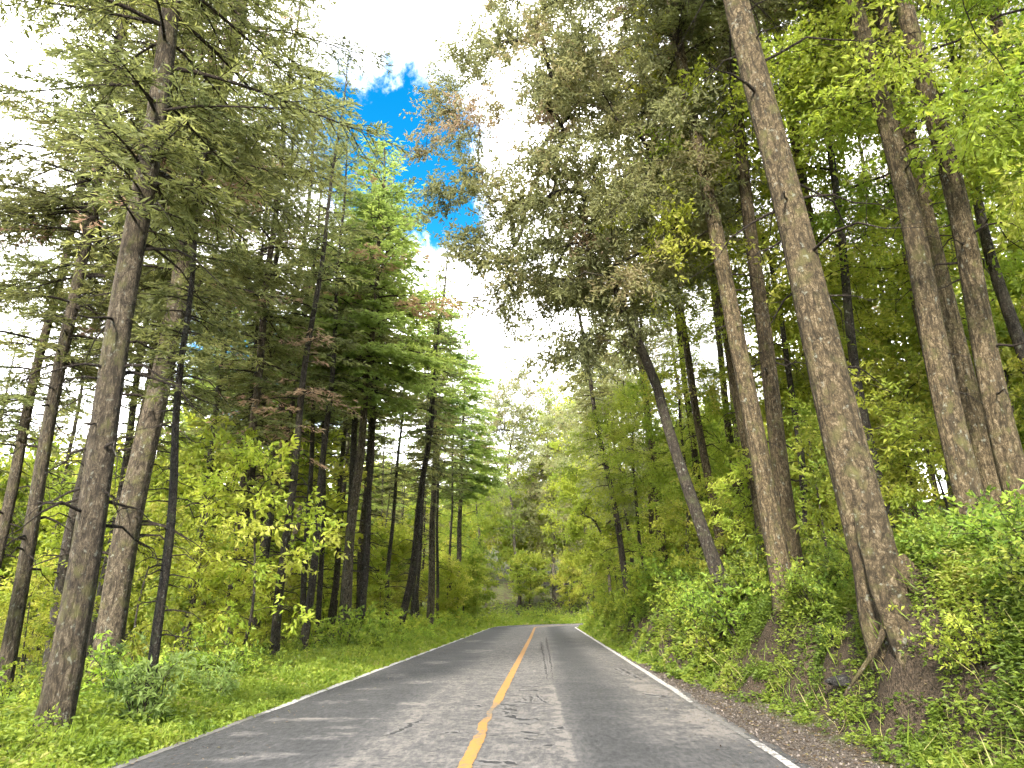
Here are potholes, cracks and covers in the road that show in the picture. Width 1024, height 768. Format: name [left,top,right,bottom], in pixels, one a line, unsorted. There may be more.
crack [382,719,472,736]
crack [464,641,569,748]
crack [611,667,674,698]
